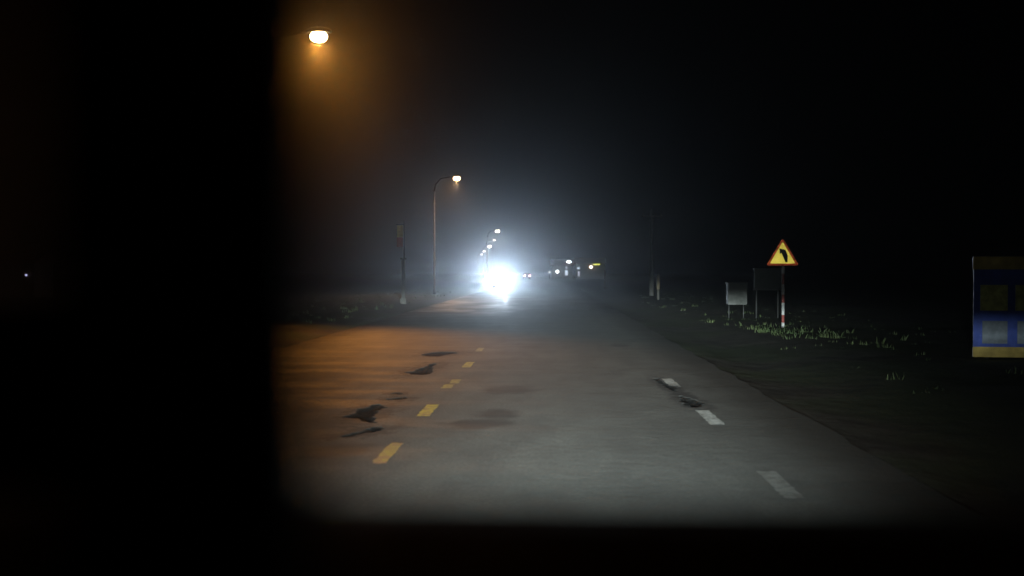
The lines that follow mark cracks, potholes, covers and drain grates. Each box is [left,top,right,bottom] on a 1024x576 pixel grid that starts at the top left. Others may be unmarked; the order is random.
pothole [341,427,387,437]
pothole [404,363,437,375]
pothole [677,395,705,408]
pothole [342,404,388,423]
